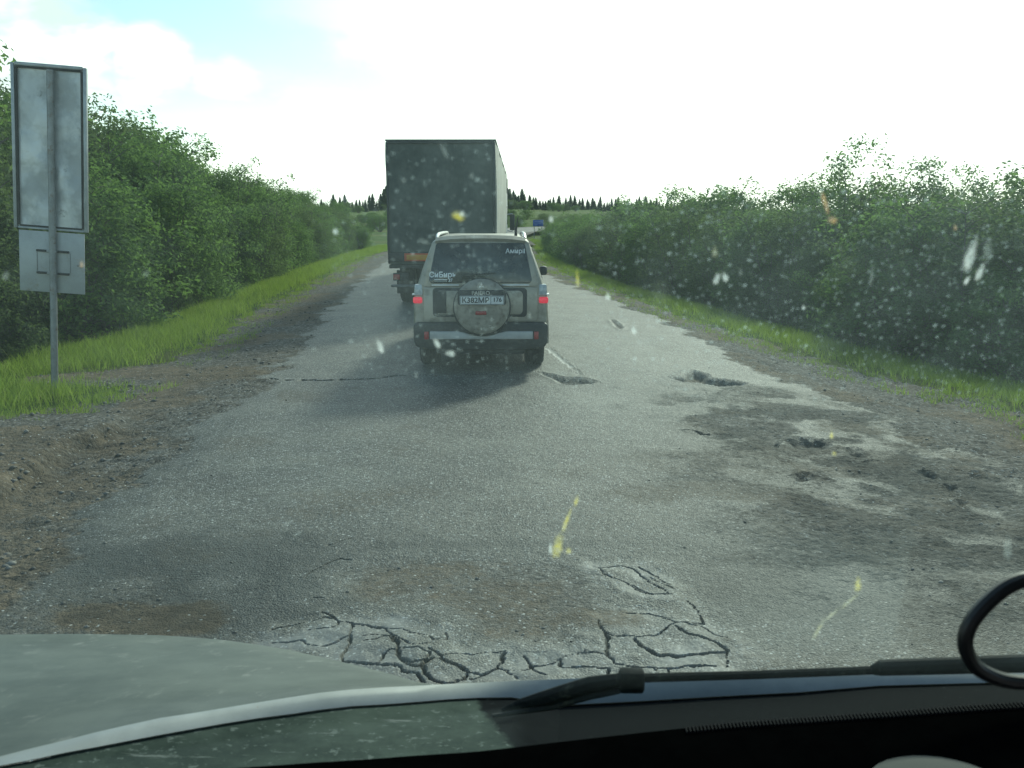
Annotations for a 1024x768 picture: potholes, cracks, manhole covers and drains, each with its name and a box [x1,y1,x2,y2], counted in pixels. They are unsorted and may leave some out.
pothole [534,371,601,385]
pothole [665,369,750,387]
pothole [942,483,960,491]
pothole [915,469,940,480]
pothole [786,471,817,482]
pothole [785,436,834,451]
crack [272,565,730,684]
crack [266,371,522,381]
